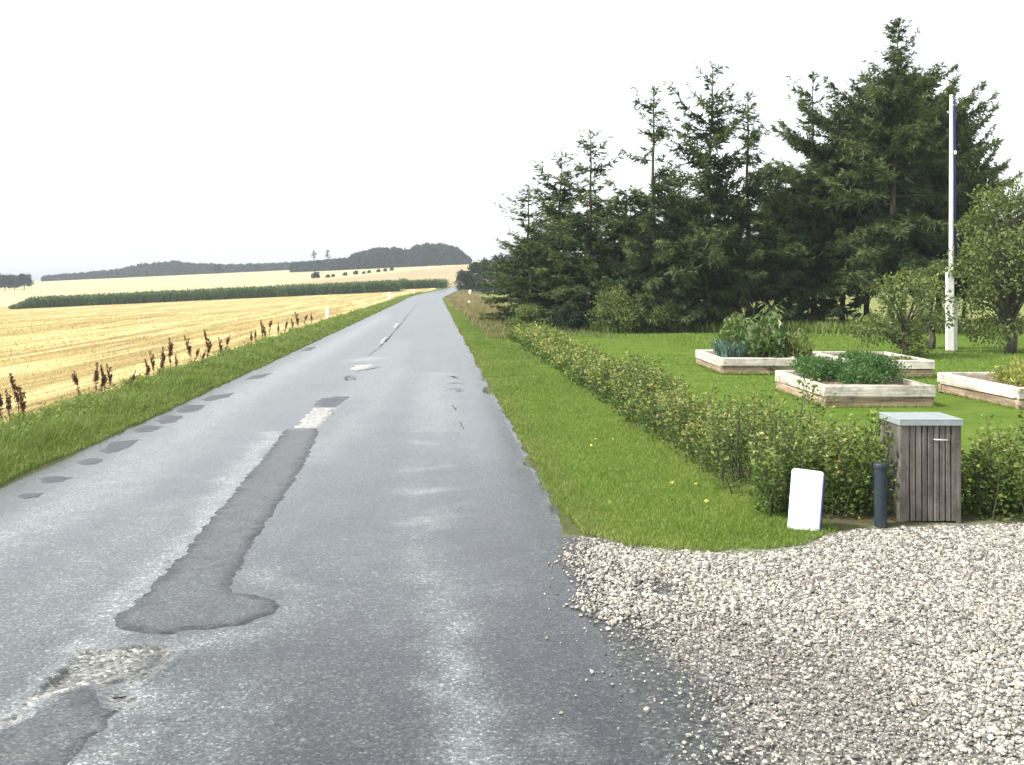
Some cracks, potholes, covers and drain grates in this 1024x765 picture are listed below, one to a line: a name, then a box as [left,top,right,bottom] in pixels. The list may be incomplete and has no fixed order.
pothole [0,642,188,731]
